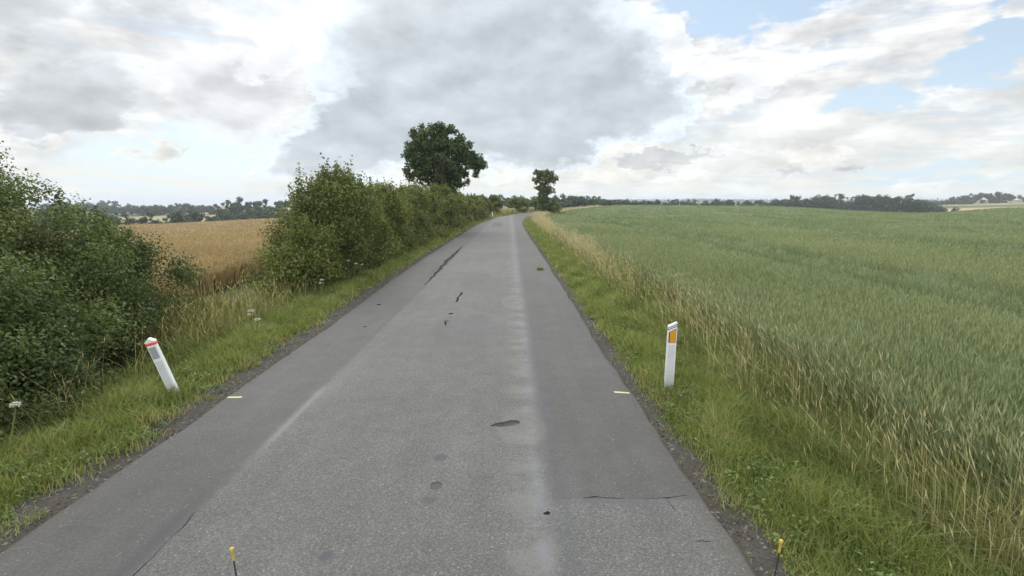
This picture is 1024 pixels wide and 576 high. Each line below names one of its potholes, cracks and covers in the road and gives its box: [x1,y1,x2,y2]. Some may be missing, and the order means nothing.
crack [585,495,685,511]
crack [425,248,463,302]
